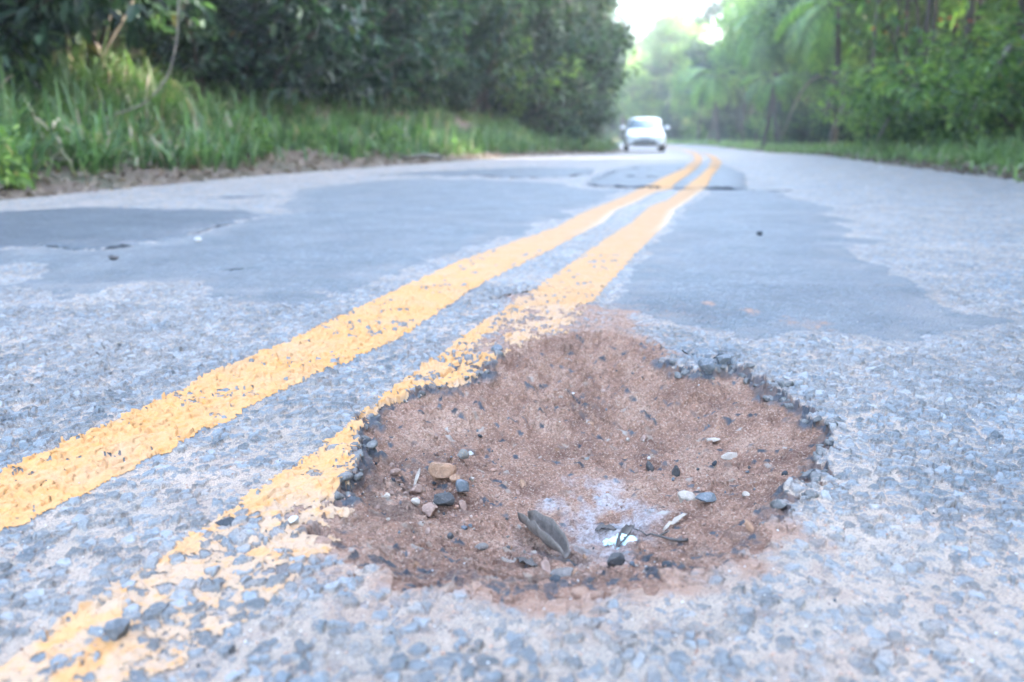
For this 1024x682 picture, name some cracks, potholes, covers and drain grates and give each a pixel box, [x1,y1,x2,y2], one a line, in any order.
pothole [321,330,841,607]
